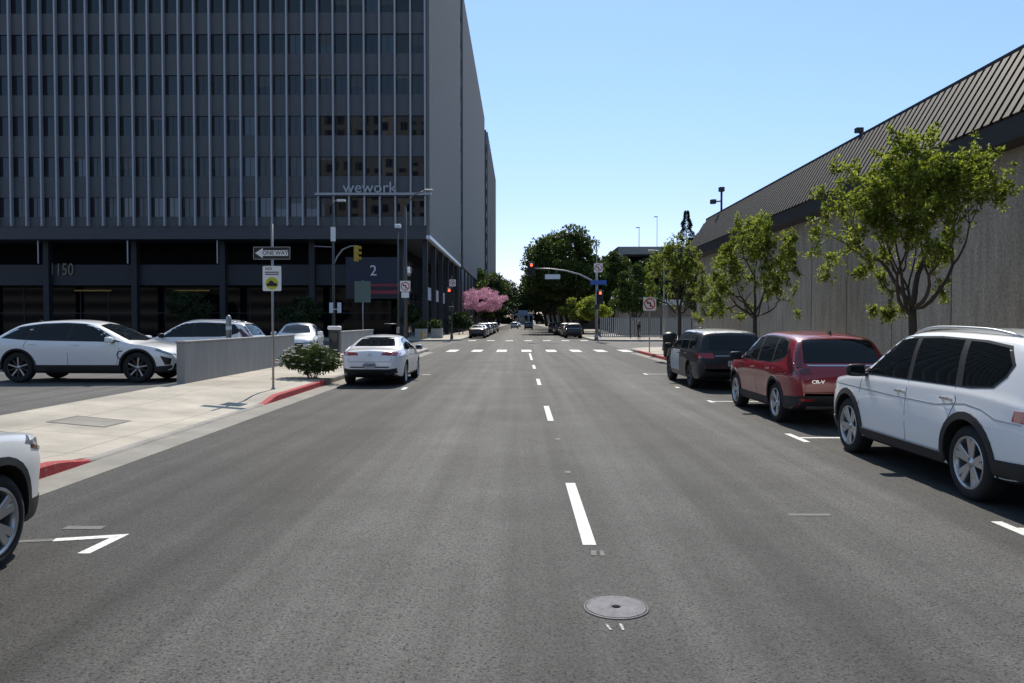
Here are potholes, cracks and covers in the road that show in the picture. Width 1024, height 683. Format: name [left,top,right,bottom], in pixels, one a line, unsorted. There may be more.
manhole cover [583,596,650,620]
utility cover [47,415,129,427]
